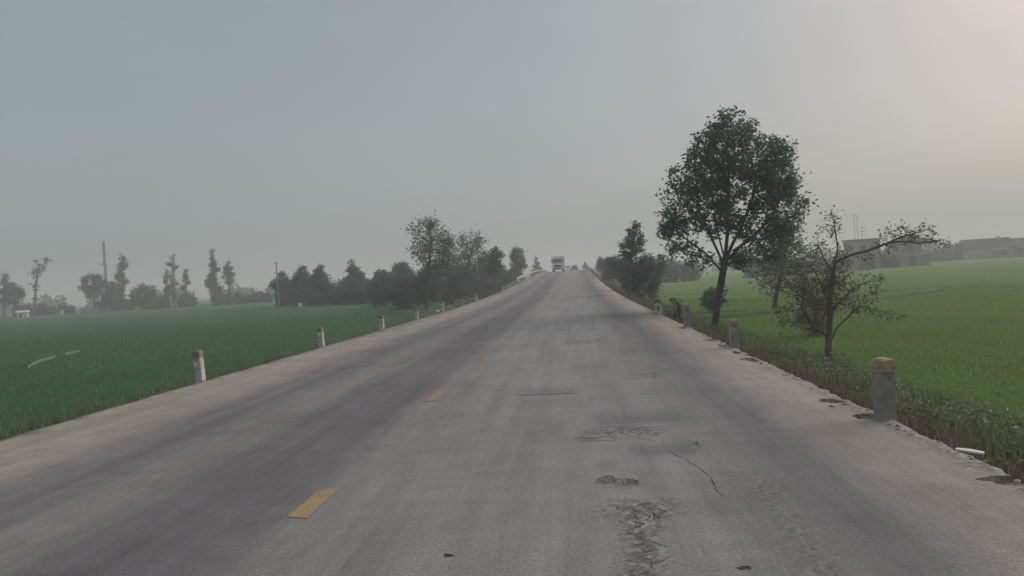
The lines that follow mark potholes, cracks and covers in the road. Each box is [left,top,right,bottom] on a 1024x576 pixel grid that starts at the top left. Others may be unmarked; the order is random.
pothole [620,479,639,487]
crack [625,498,674,576]
pothole [975,476,1024,486]
pothole [594,475,617,484]
crack [667,450,722,495]
